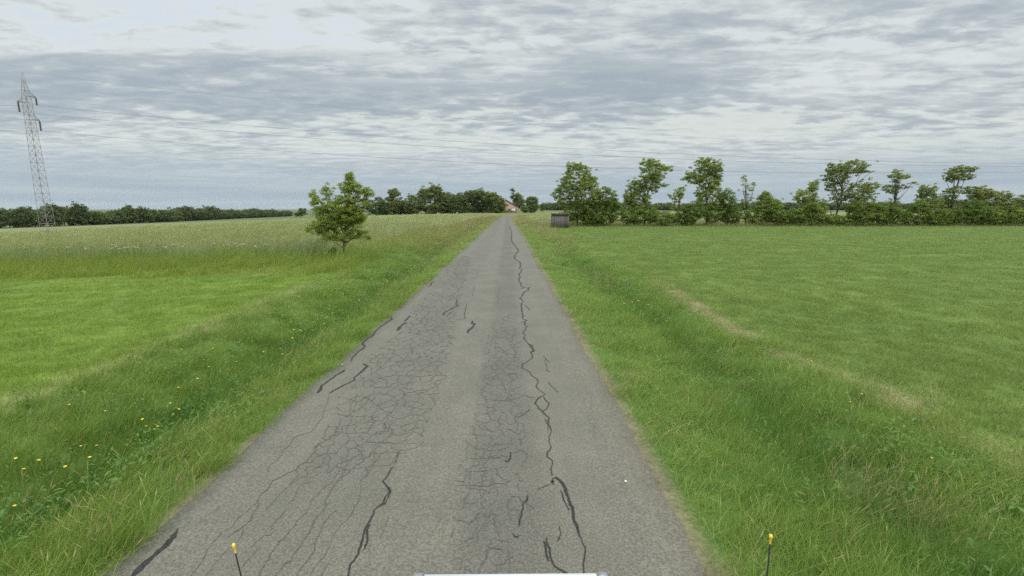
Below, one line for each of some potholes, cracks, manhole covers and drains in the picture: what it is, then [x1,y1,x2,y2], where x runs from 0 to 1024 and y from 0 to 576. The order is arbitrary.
crack [451,228,555,574]
crack [191,256,478,576]
